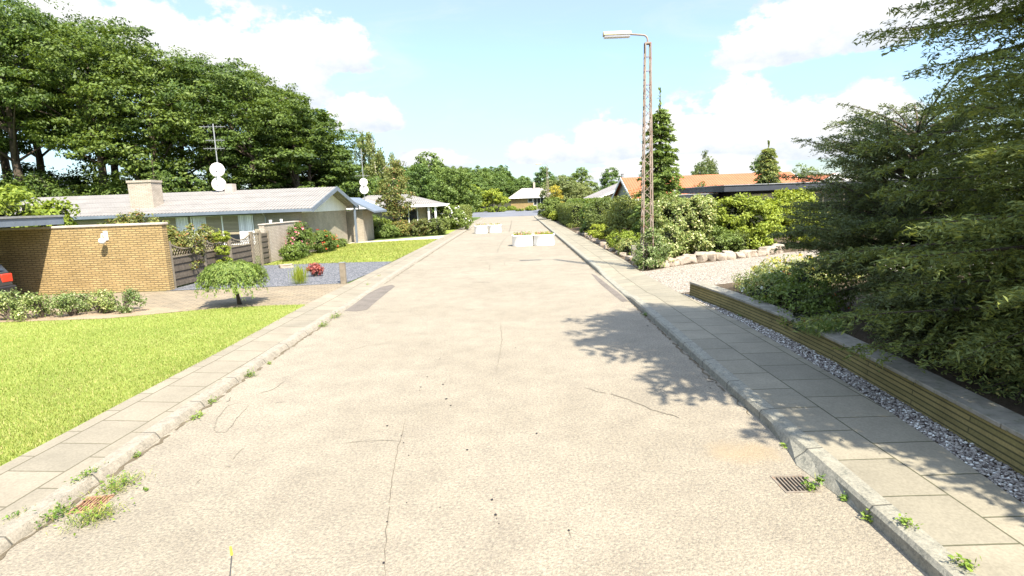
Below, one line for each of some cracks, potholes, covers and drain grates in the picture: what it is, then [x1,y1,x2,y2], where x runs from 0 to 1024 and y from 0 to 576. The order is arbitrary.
crack [584,387,679,418]
crack [348,425,404,576]
crack [213,397,241,432]
drain grate [68,494,116,514]
drain grate [770,475,822,493]
